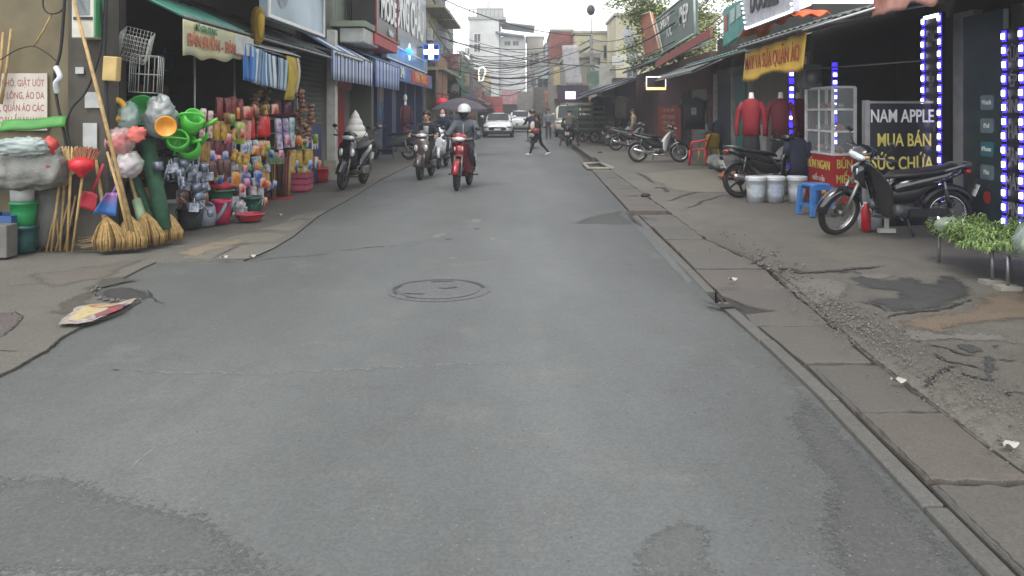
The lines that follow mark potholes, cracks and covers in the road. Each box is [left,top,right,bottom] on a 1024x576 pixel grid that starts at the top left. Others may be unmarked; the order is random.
crack [925,345,1024,396]
crack [622,187,723,224]
manhole cover [387,278,491,302]
